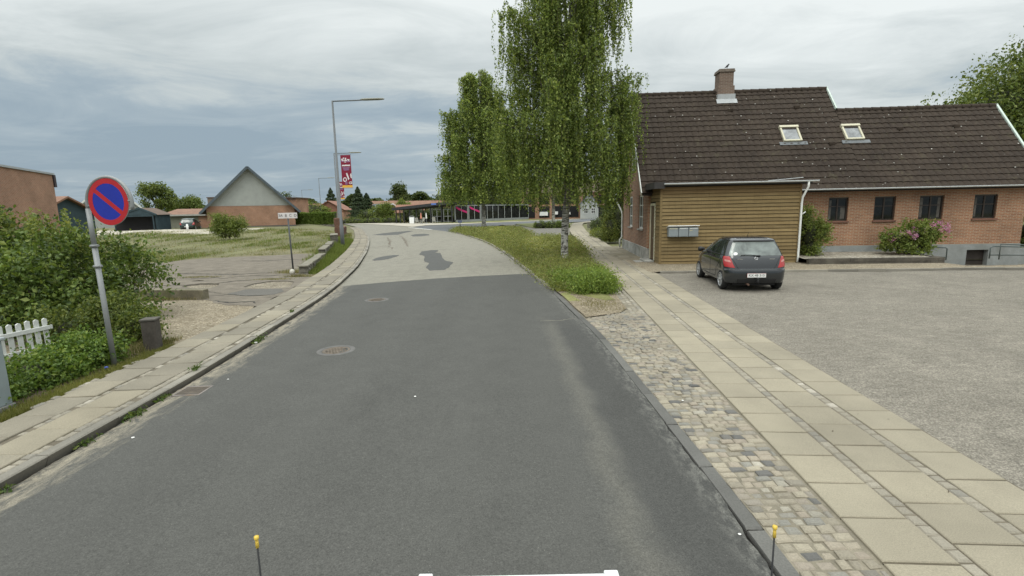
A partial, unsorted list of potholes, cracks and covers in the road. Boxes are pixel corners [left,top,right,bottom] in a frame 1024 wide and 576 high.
manhole cover [316,345,355,356]
drain grate [171,385,214,397]
